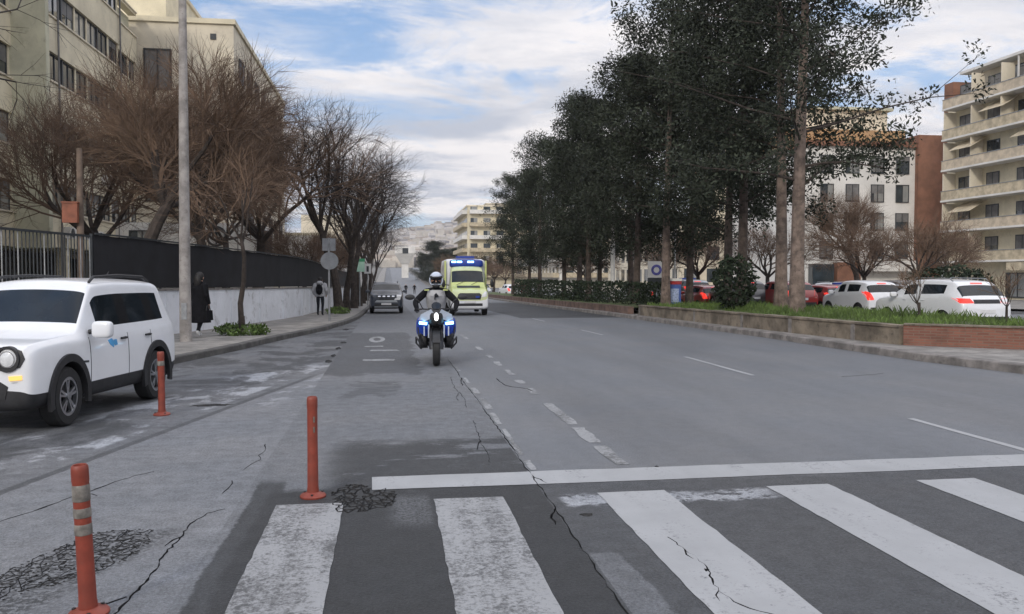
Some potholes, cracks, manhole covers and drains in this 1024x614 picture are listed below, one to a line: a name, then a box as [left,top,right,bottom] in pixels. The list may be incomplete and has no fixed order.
crack [668,537,771,614]
crack [331,484,397,513]
crack [0,444,266,614]
